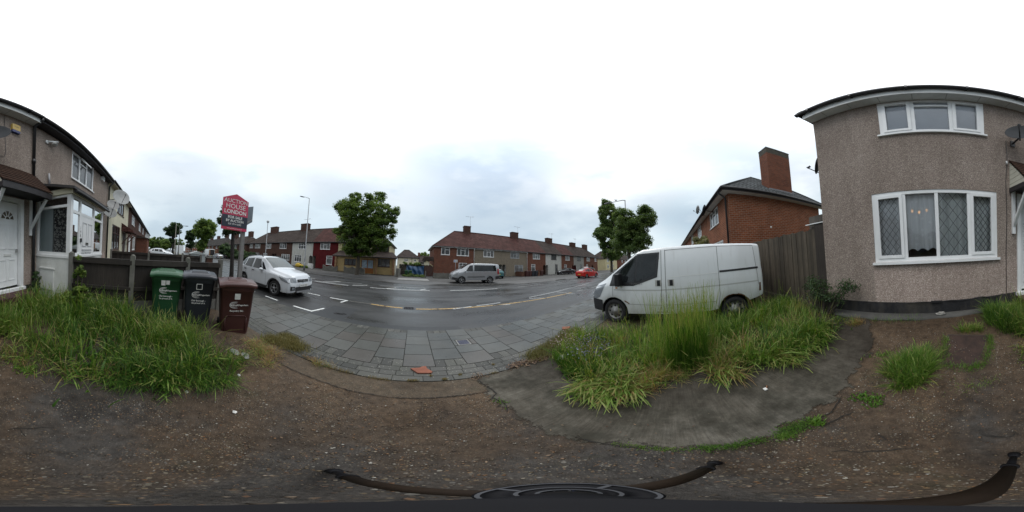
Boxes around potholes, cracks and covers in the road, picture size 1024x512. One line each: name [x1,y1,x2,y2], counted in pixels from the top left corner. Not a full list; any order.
crack [808,396,862,426]
